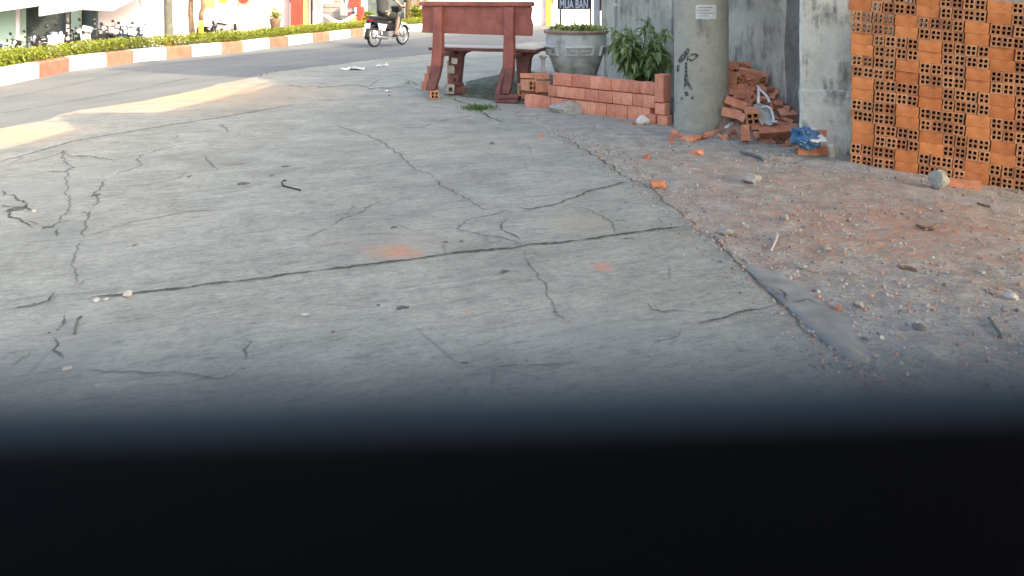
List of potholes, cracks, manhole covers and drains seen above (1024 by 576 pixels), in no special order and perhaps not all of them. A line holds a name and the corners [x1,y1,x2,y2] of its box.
crack [342,127,828,346]
crack [3,192,37,226]
crack [15,152,208,235]
